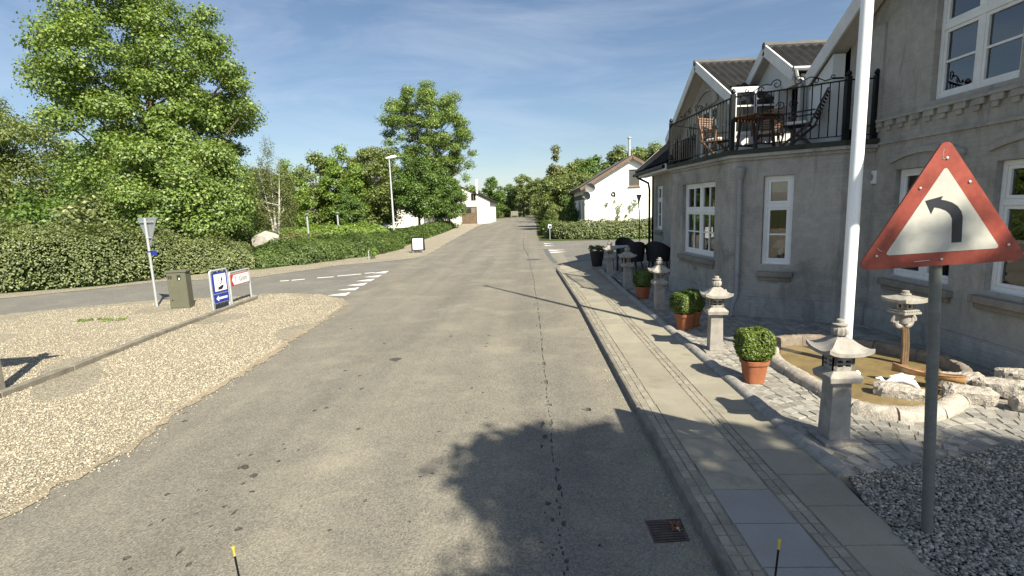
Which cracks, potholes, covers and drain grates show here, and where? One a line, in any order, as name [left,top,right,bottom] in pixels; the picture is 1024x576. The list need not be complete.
crack [528,251,569,576]
drain grate [645,518,690,544]
